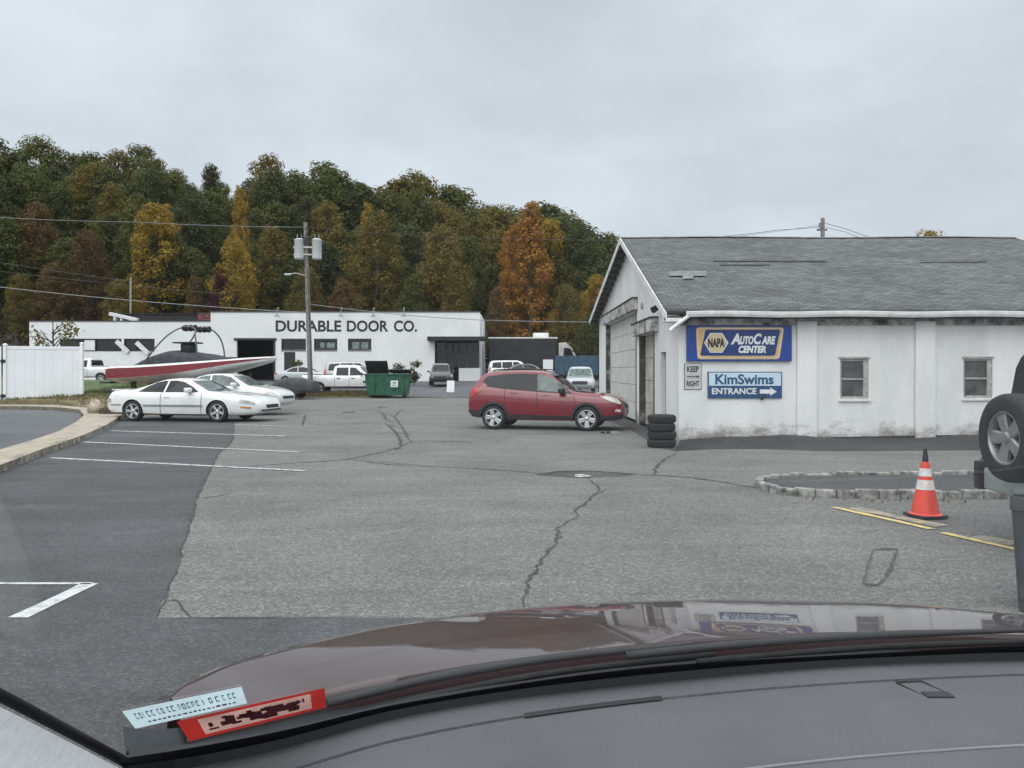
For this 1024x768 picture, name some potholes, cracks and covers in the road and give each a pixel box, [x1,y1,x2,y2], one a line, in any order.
crack [652,452,678,474]
crack [239,403,471,467]
crack [522,479,606,607]
